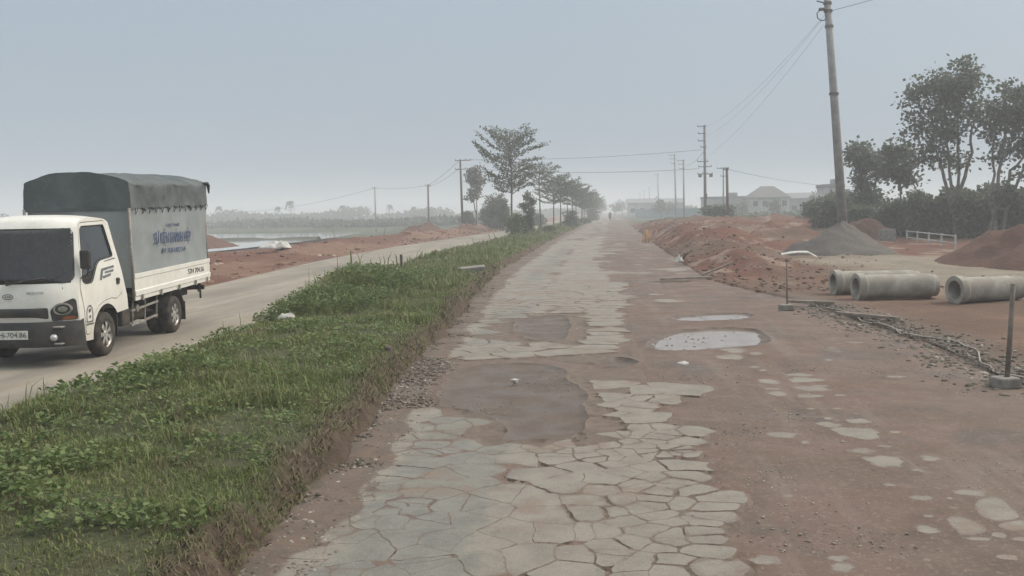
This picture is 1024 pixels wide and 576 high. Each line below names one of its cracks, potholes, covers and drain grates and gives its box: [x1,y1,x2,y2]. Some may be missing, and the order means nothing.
pothole [592,357,639,367]
pothole [645,327,771,350]
pothole [436,363,590,441]
crack [252,282,755,576]
pothole [512,315,572,341]
pothole [670,312,753,321]
